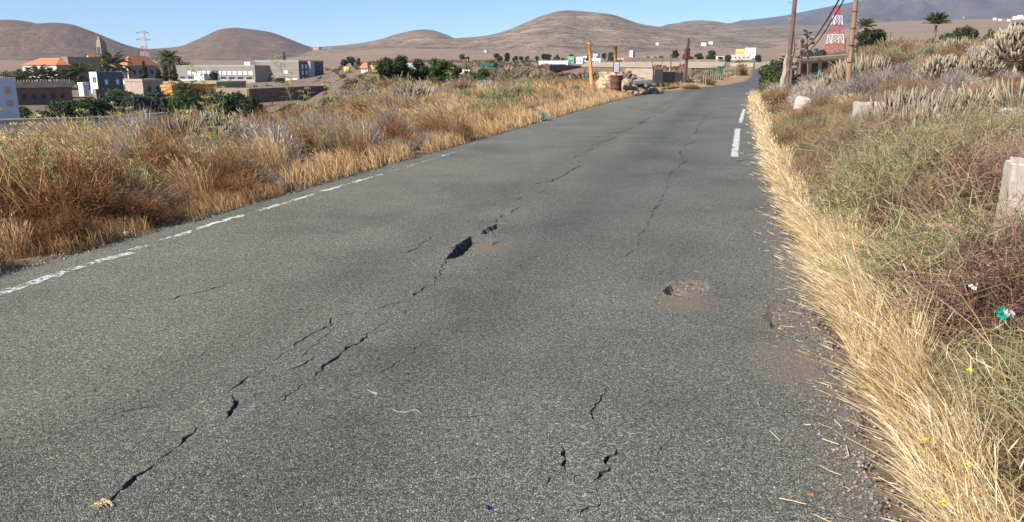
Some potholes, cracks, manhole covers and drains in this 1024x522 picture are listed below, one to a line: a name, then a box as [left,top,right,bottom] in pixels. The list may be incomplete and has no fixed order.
crack [479,106,673,222]
pothole [442,234,479,262]
crack [95,259,529,516]
pothole [658,277,718,299]
pothole [757,295,814,339]
crack [516,348,662,517]
pothole [477,223,506,236]
crack [625,110,750,256]
